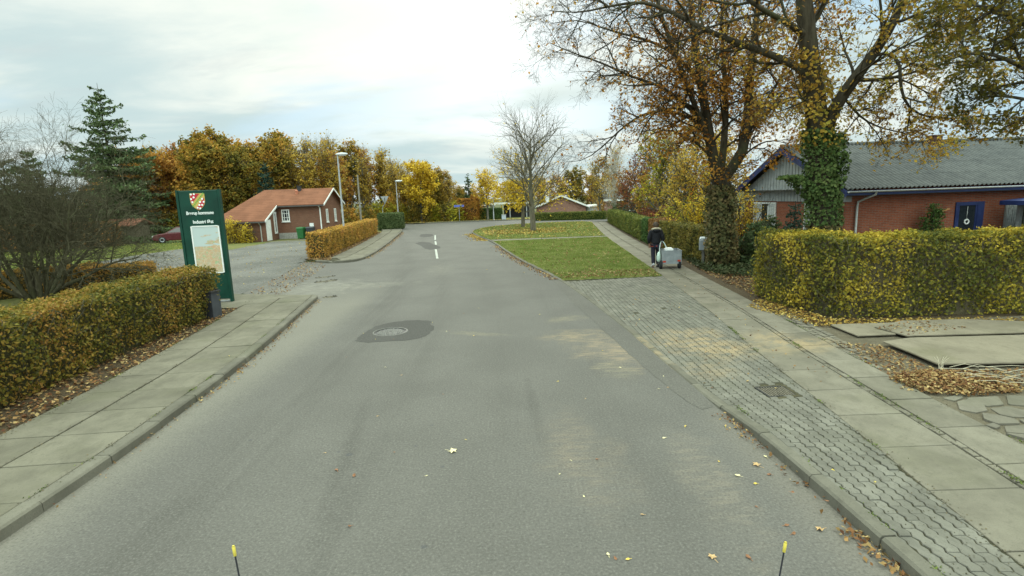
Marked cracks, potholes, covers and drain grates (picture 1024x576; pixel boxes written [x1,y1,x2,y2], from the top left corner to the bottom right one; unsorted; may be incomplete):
drain grate [754,385,796,397]
manhole cover [373,327,408,336]
